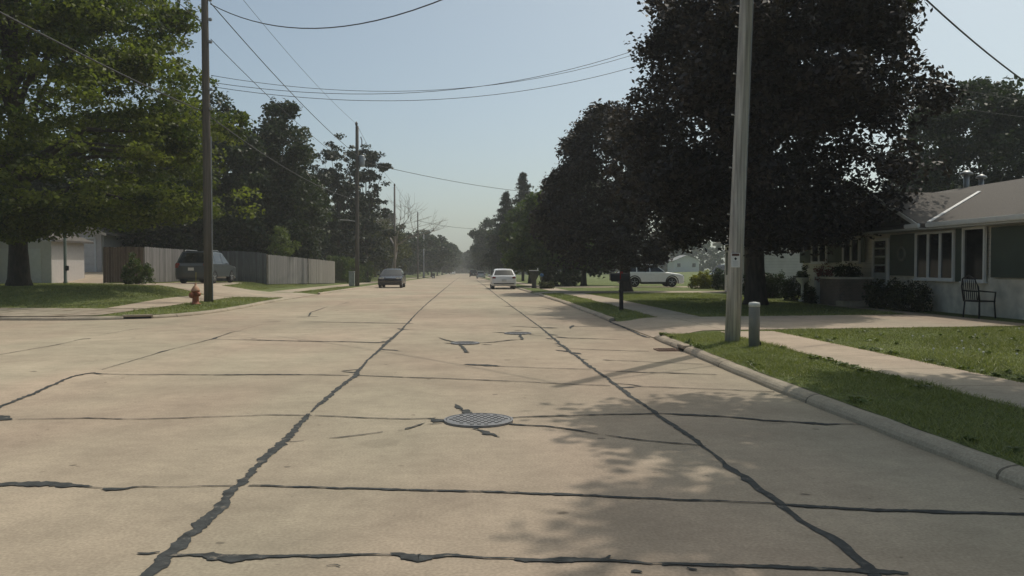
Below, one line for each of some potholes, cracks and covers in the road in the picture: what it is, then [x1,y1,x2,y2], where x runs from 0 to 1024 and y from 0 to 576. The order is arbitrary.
manhole cover [444,413,513,428]
